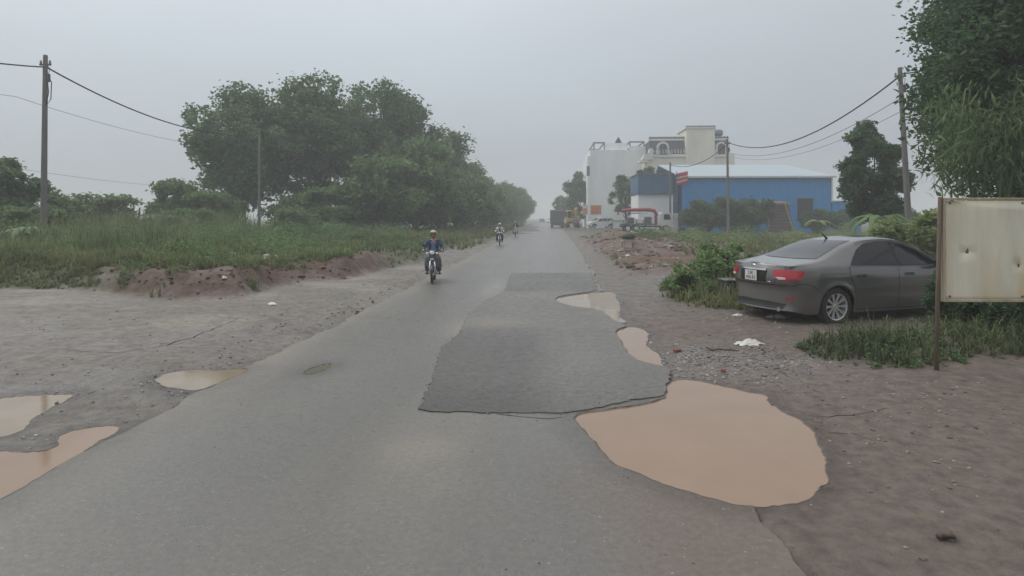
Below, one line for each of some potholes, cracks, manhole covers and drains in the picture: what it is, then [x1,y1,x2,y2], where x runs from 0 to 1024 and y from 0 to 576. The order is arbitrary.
pothole [0,394,74,437]
pothole [574,379,829,507]
pothole [615,327,664,366]
crack [800,408,885,442]
pothole [154,368,249,391]
crack [31,317,243,353]
pothole [555,291,626,324]
pothole [0,425,120,499]
